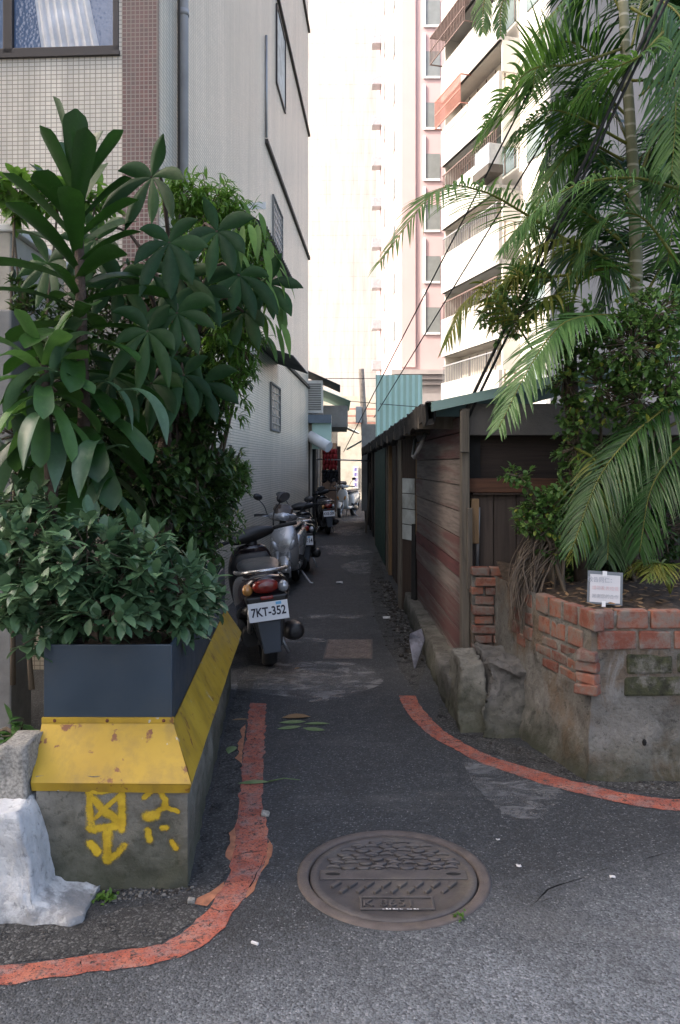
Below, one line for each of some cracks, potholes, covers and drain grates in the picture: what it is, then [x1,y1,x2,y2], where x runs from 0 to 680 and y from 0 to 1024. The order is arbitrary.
crack [533,852,668,904]
manhole cover [297,830,491,931]
